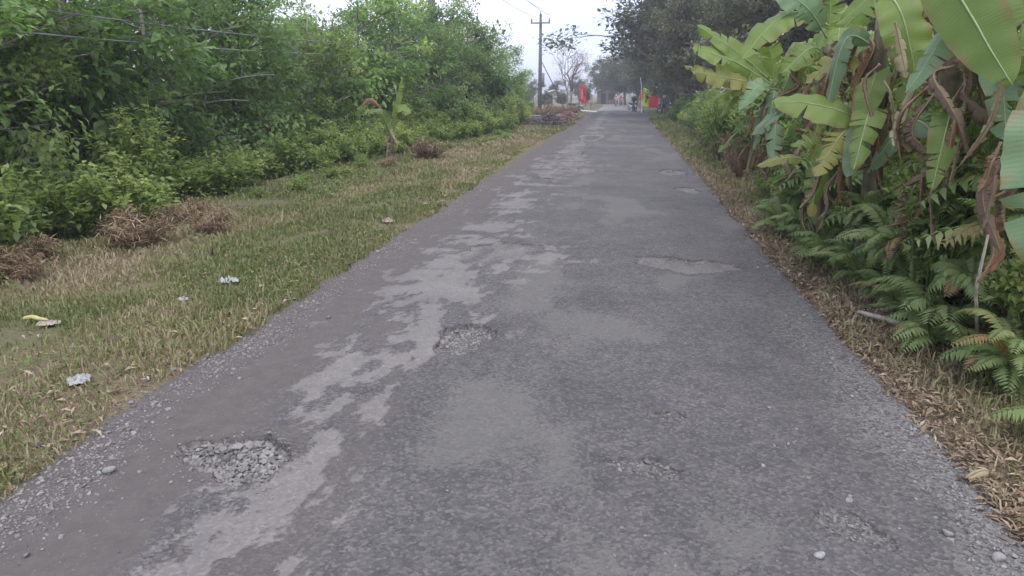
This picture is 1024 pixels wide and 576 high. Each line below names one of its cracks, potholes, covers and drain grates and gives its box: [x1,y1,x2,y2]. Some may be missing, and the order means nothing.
pothole [594,453,693,487]
pothole [427,321,504,359]
pothole [146,416,320,499]
